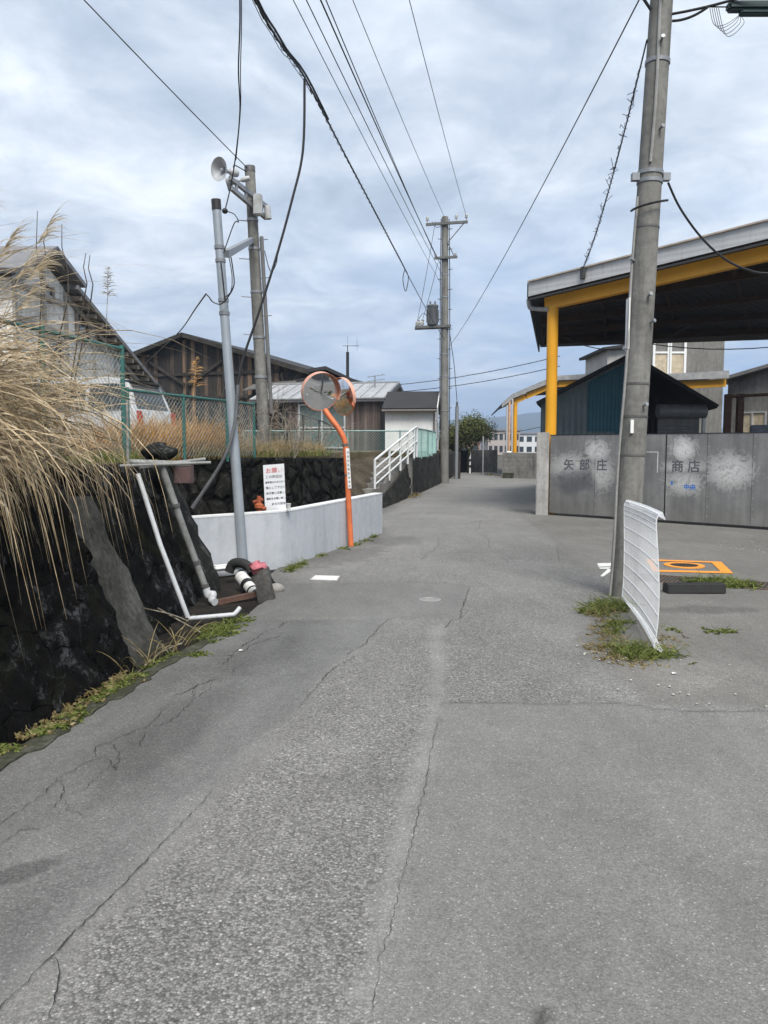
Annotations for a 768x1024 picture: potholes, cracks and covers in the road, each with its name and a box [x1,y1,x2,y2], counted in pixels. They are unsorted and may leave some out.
crack [0,621,305,844]
crack [298,617,395,709]
